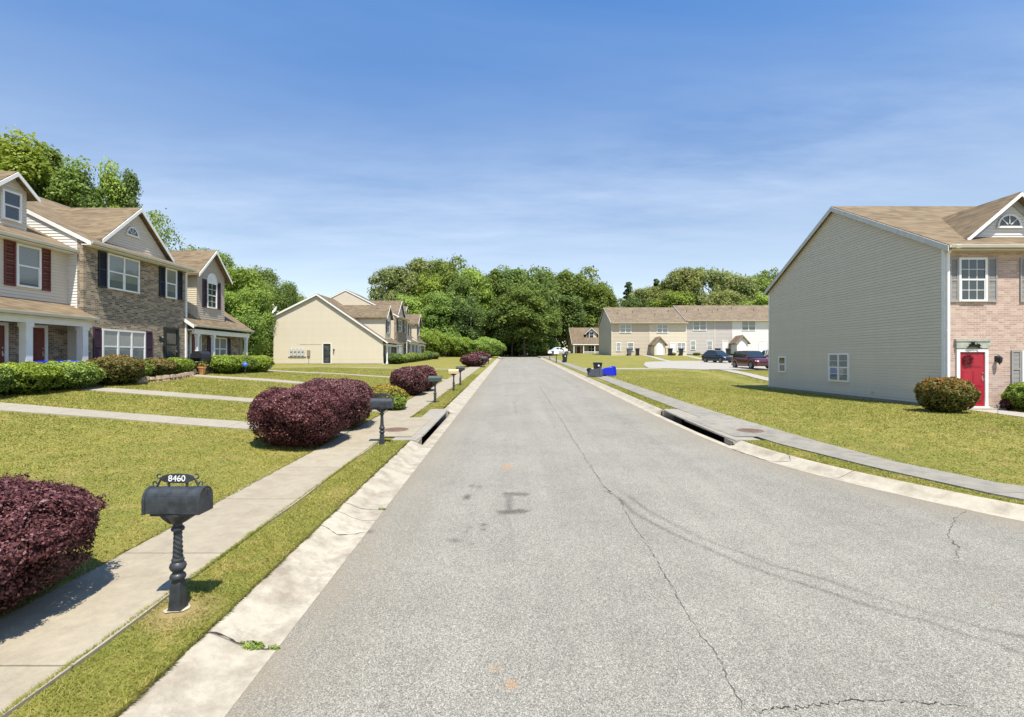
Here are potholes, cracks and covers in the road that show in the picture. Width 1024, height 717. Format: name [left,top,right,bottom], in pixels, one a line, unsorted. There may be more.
crack [538,385,743,709]
drain grate [392,409,449,445]
drain grate [661,409,759,446]
crack [750,698,964,714]
